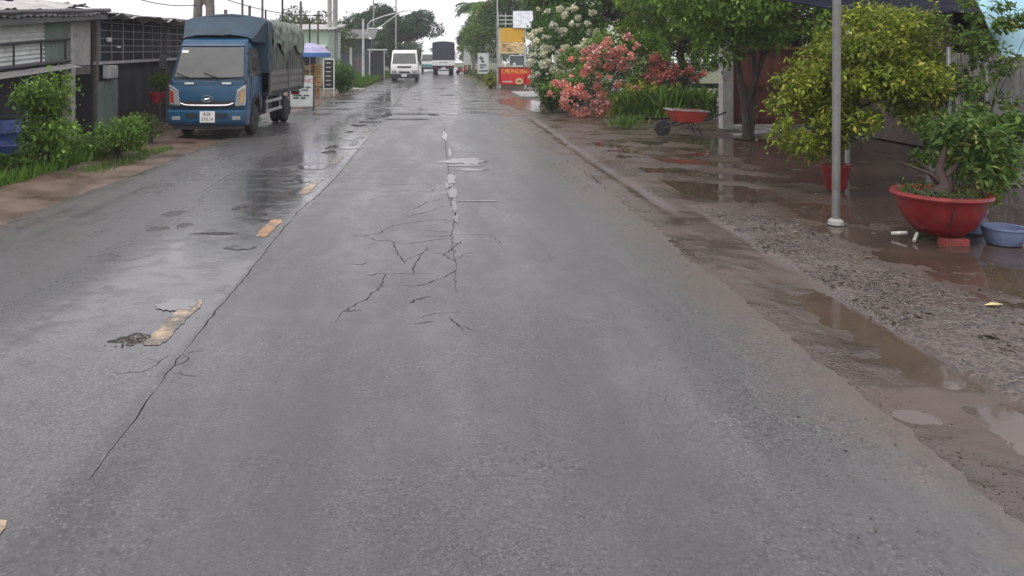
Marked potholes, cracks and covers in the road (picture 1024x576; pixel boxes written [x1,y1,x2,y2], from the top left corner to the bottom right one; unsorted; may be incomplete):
pothole [107,332,151,349]
crack [113,351,200,377]
crack [335,90,502,332]
